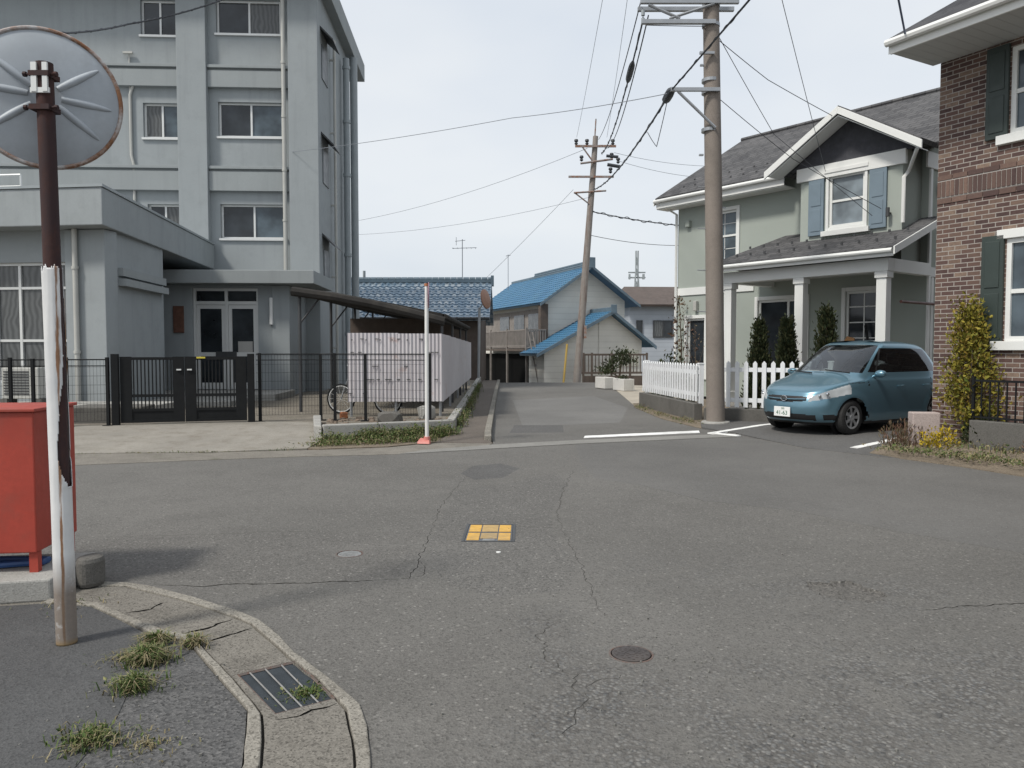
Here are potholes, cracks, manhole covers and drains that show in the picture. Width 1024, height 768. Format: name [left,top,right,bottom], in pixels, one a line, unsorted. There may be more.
crack [154,476,467,587]
drain grate [237,661,336,714]
manhole cover [461,524,516,542]
crack [523,473,605,615]
manhole cover [609,645,654,663]
crack [535,613,621,738]
